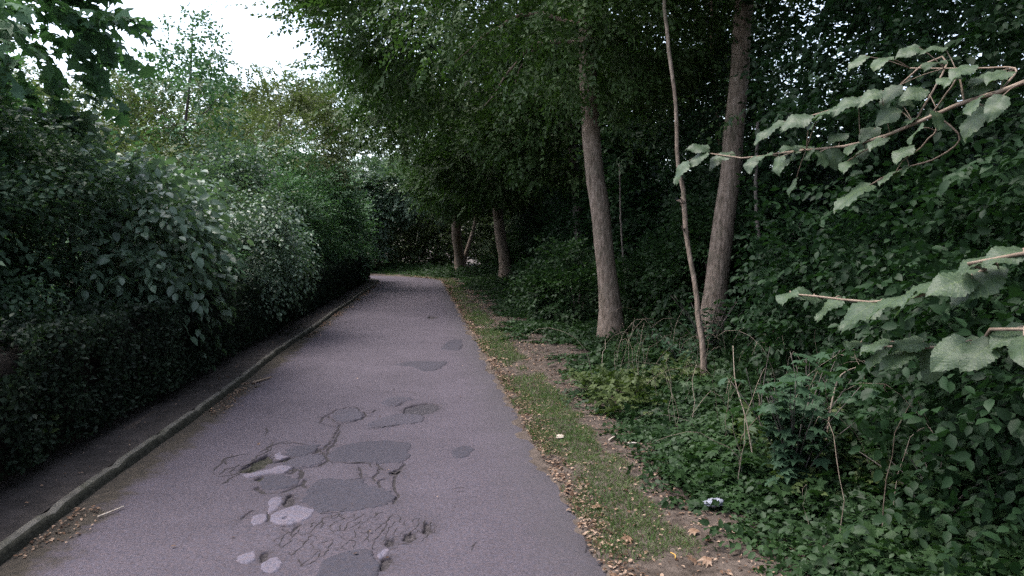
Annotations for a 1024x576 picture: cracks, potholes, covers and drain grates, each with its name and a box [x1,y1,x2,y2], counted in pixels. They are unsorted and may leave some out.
crack [213,407,435,566]
pothole [241,457,290,473]
